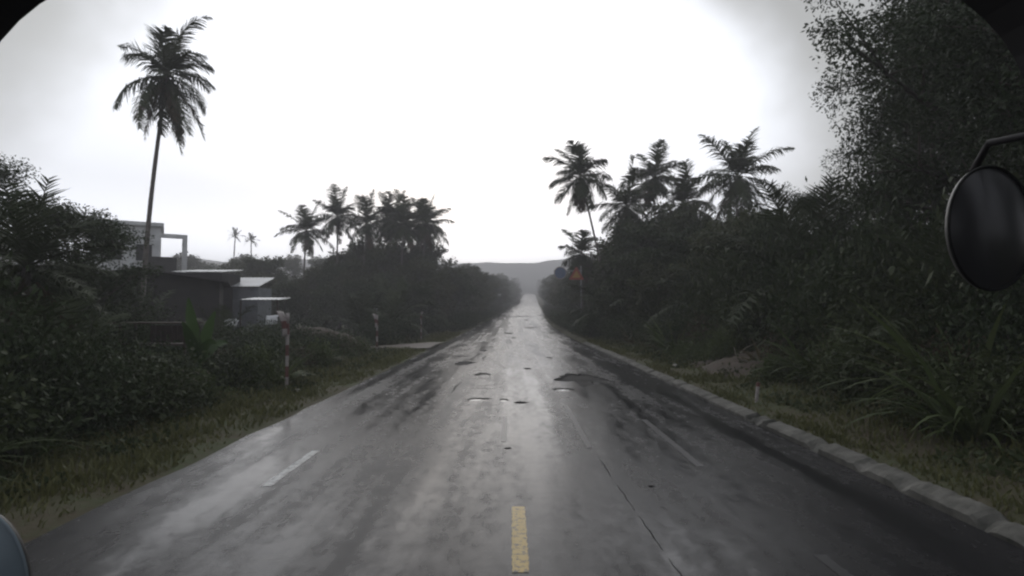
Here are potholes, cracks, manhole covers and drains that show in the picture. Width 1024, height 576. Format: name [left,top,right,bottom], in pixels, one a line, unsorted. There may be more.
crack [598,457,683,576]
pothole [545,373,609,386]
